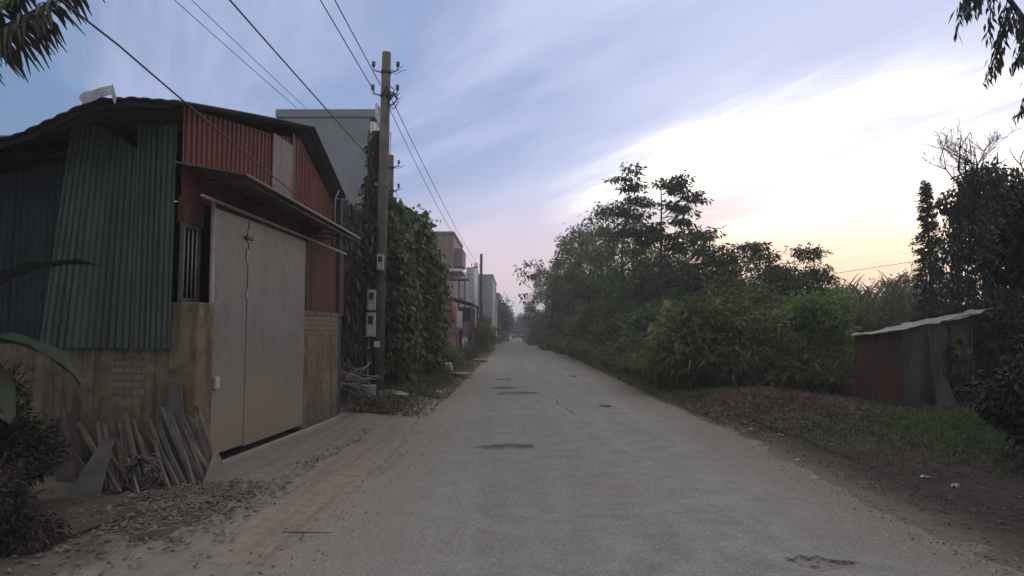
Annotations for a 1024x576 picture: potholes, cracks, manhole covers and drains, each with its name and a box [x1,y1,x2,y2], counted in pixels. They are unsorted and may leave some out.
pothole [785,554,867,572]
pothole [468,443,536,451]
